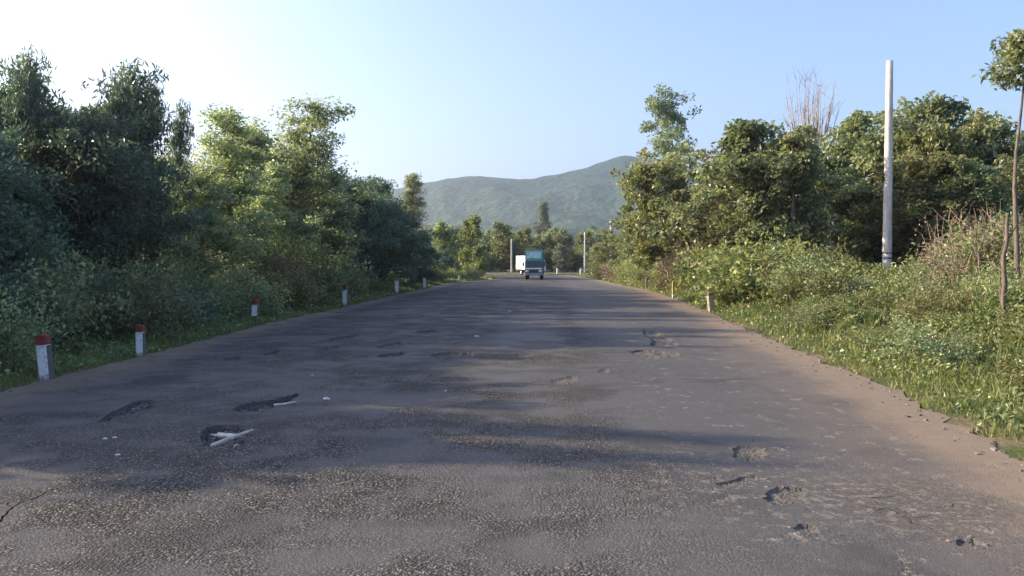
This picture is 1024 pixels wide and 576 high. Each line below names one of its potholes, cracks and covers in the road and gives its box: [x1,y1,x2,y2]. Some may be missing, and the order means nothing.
pothole [714,475,759,486]
pothole [732,446,768,462]
pothole [627,350,681,360]
pothole [97,399,156,422]
pothole [550,376,579,384]
pothole [641,329,682,349]
pothole [793,523,821,534]
pothole [762,486,811,505]
pothole [955,536,984,546]
pothole [199,425,253,448]
pothole [231,393,300,412]
crack [0,486,62,522]
